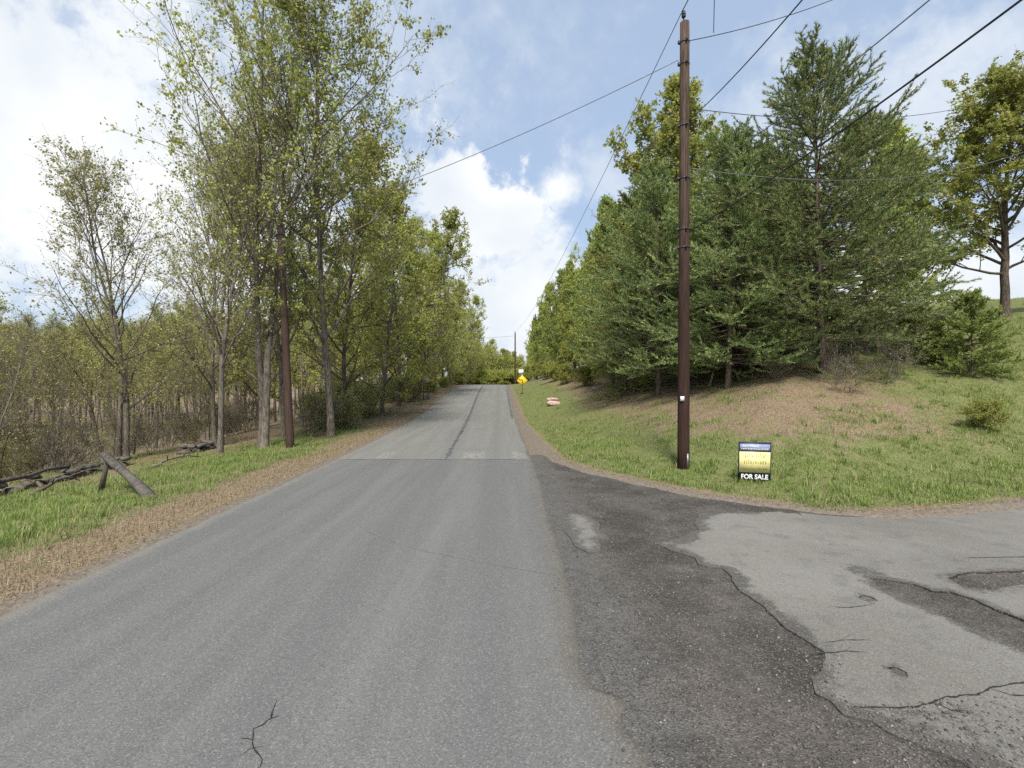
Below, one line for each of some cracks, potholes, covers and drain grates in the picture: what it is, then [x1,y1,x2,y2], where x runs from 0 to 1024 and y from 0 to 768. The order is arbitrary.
crack [854,682,1024,711]
crack [243,700,279,768]
crack [351,514,552,574]
